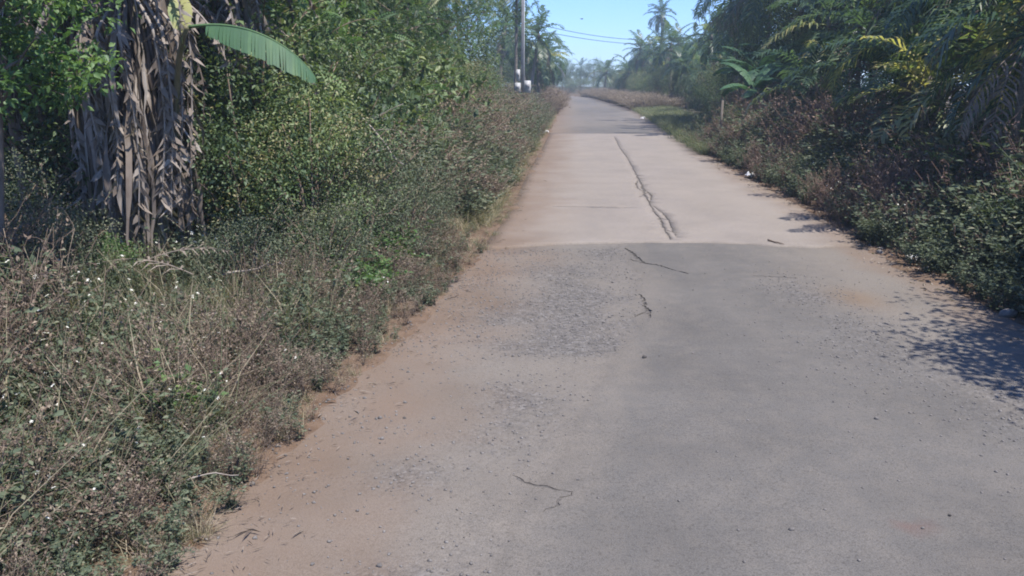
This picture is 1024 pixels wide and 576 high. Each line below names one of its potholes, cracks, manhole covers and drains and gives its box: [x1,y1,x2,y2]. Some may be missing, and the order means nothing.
crack [625,248,688,274]
crack [512,475,572,511]
crack [614,137,676,239]
